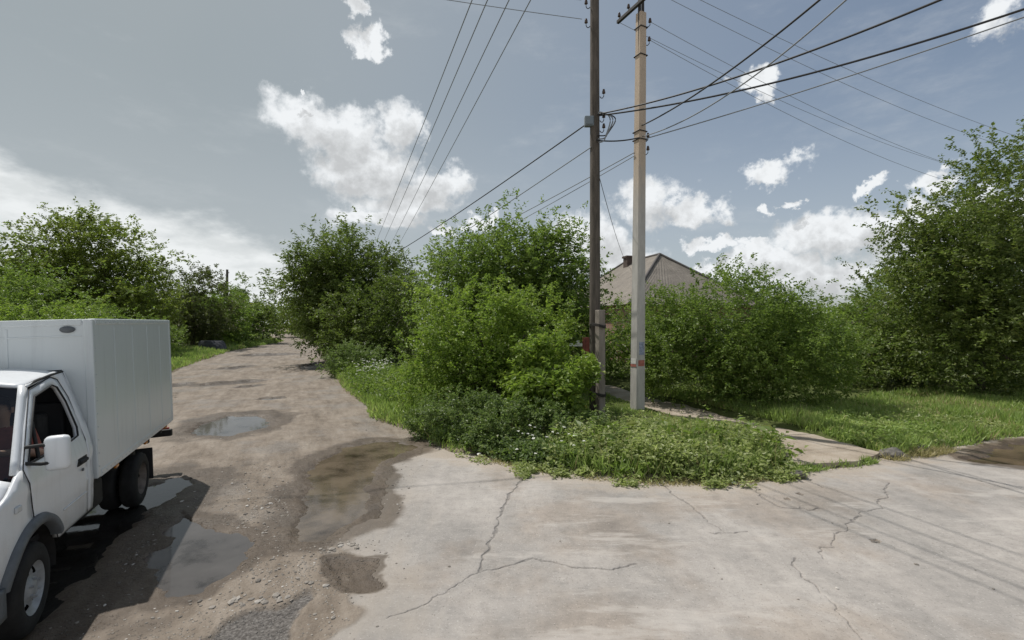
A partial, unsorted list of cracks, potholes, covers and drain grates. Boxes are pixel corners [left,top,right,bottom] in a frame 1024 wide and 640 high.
pothole [175,412,287,438]
pothole [114,500,279,614]
pothole [272,437,437,553]
pothole [306,543,400,602]
crack [372,470,902,629]
